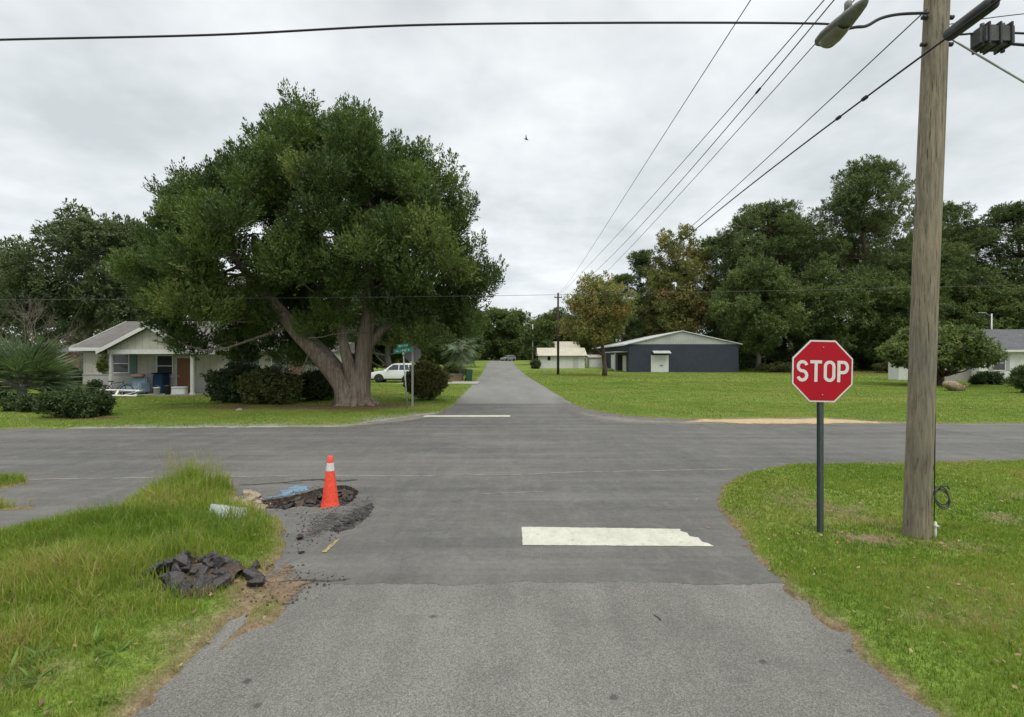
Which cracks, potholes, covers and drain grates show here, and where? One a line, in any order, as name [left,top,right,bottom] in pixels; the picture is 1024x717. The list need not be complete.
pothole [262,485,359,509]
pothole [329,503,374,532]
